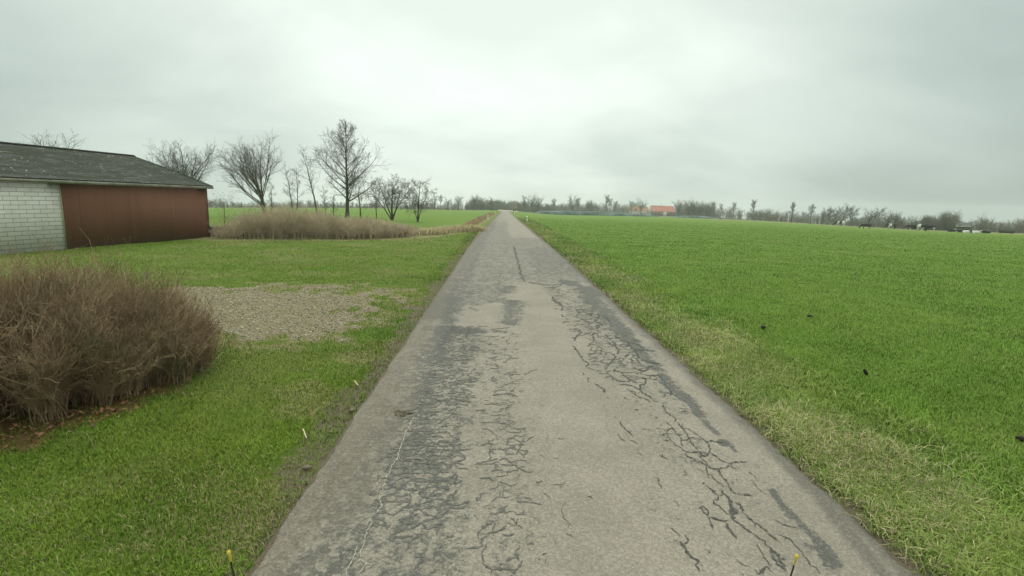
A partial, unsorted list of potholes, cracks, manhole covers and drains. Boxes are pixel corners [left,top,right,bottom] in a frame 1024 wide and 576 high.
crack [489,246,820,575]
crack [324,325,572,576]
